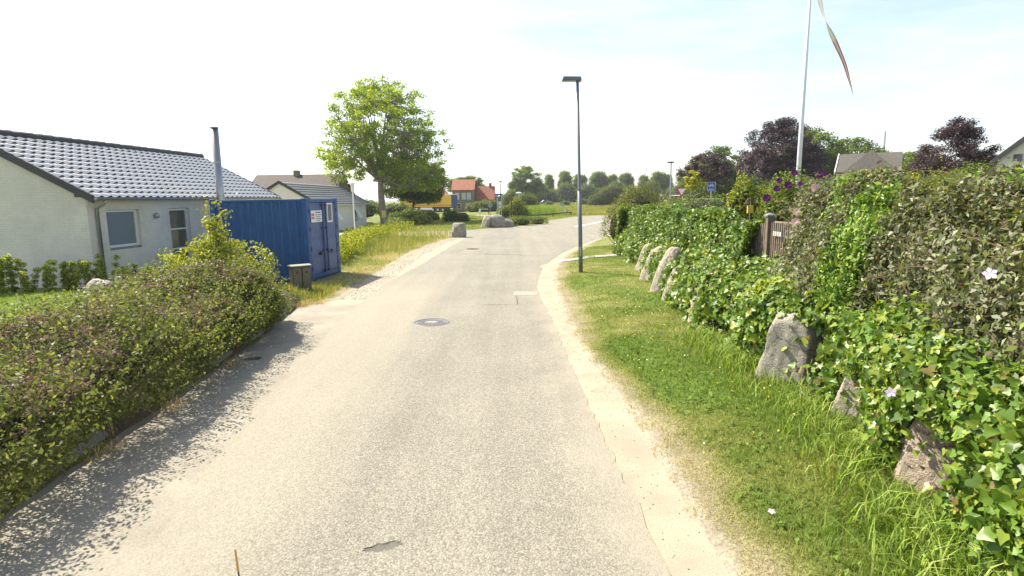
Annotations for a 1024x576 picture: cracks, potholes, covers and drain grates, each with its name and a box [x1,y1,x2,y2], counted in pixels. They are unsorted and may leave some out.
pothole [362,540,403,552]
manhole cover [412,318,450,326]
